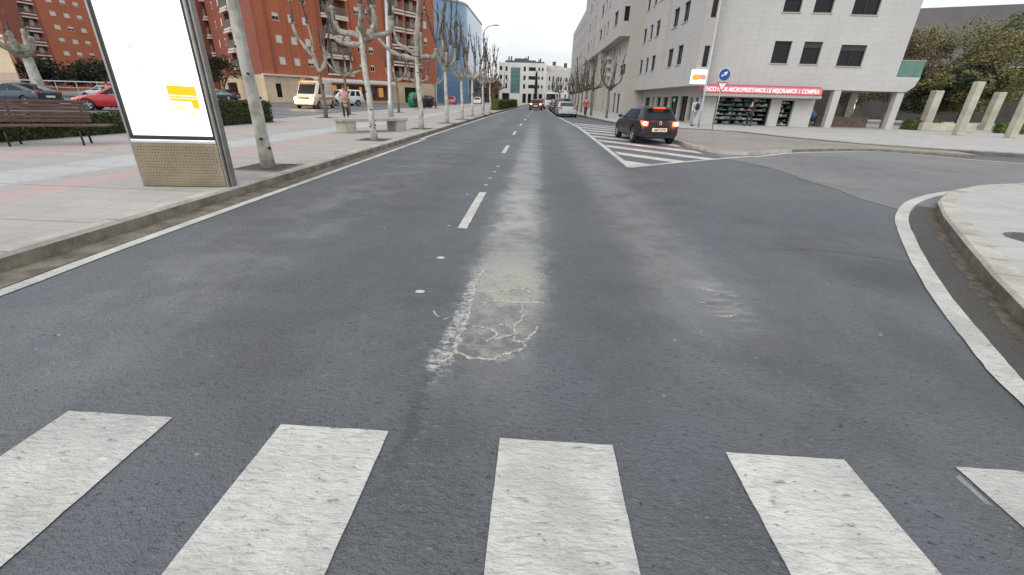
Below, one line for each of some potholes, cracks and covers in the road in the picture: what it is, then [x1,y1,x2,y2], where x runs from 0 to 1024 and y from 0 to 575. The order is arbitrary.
crack [433,269,545,364]
manhole cover [1003,232,1024,242]
